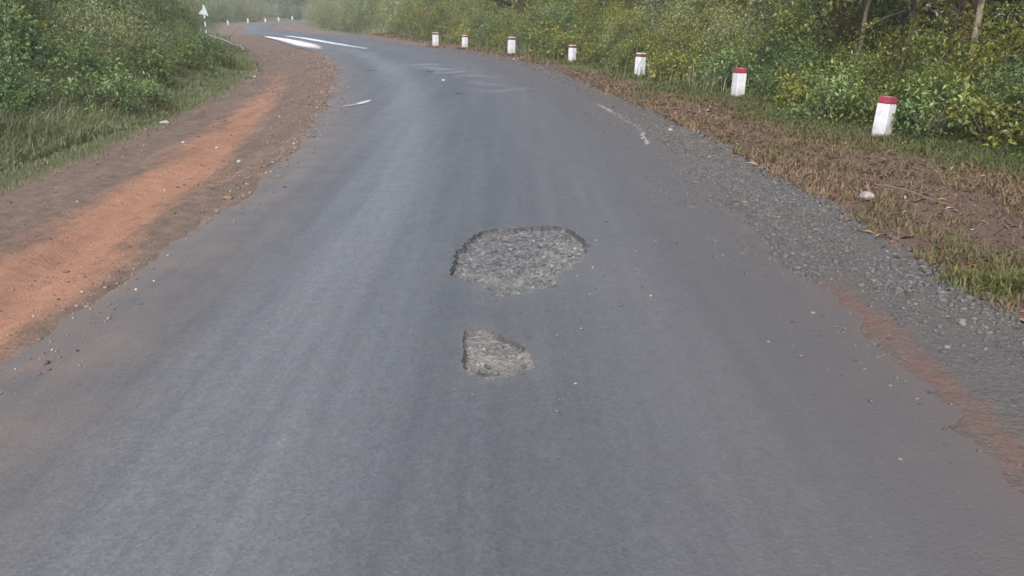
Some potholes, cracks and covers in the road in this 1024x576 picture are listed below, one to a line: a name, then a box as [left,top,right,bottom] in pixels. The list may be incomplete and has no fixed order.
pothole [431,220,661,314]
